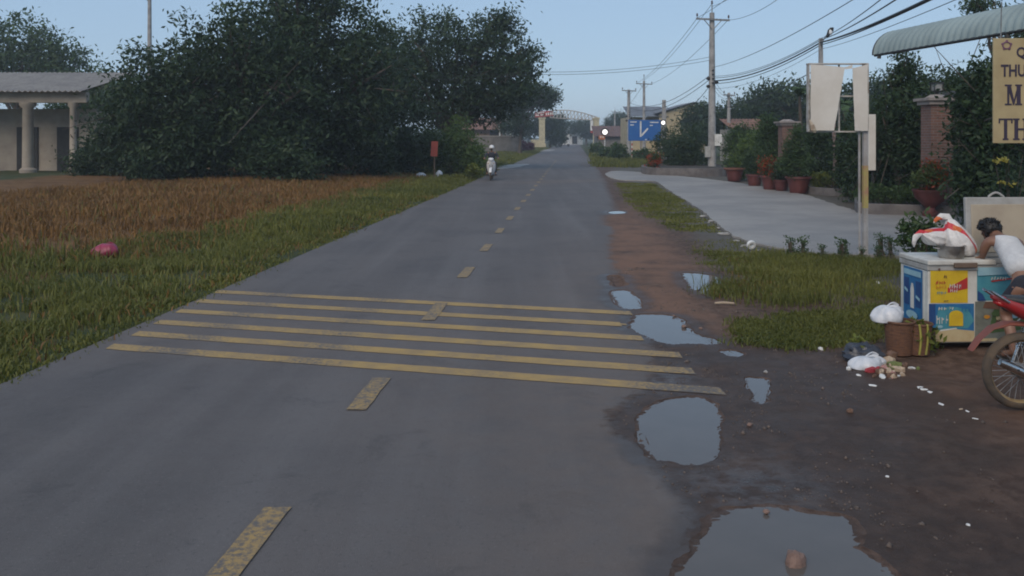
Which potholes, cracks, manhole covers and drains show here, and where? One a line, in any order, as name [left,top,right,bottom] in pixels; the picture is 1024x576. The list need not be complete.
pothole [627,313,723,345]
pothole [669,503,902,576]
pothole [608,289,643,309]
pothole [634,395,726,465]
